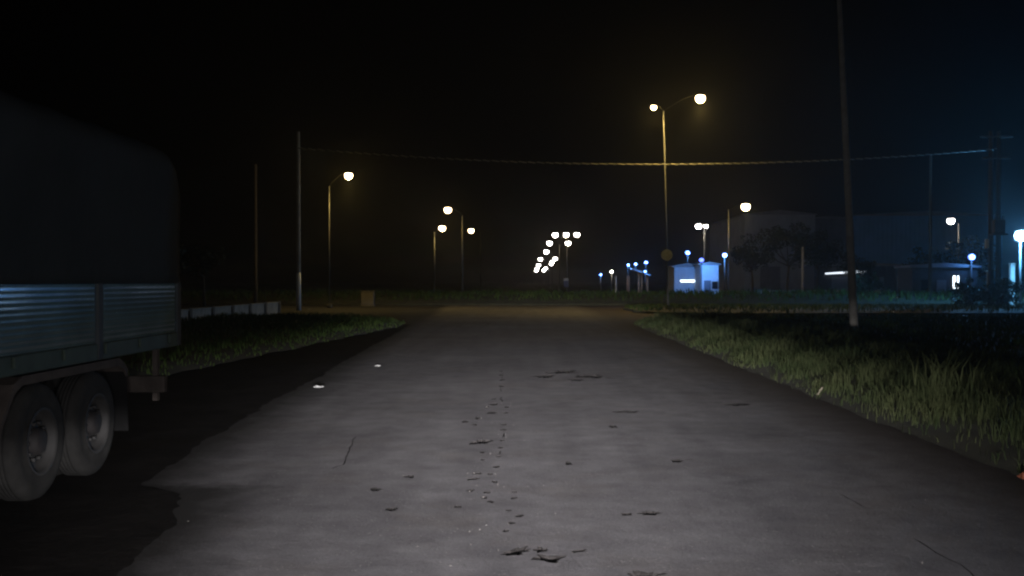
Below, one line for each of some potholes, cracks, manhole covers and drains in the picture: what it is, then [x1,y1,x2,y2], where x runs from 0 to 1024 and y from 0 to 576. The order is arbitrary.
crack [915,539,974,576]
pothole [499,546,531,556]
pothole [531,554,566,563]
